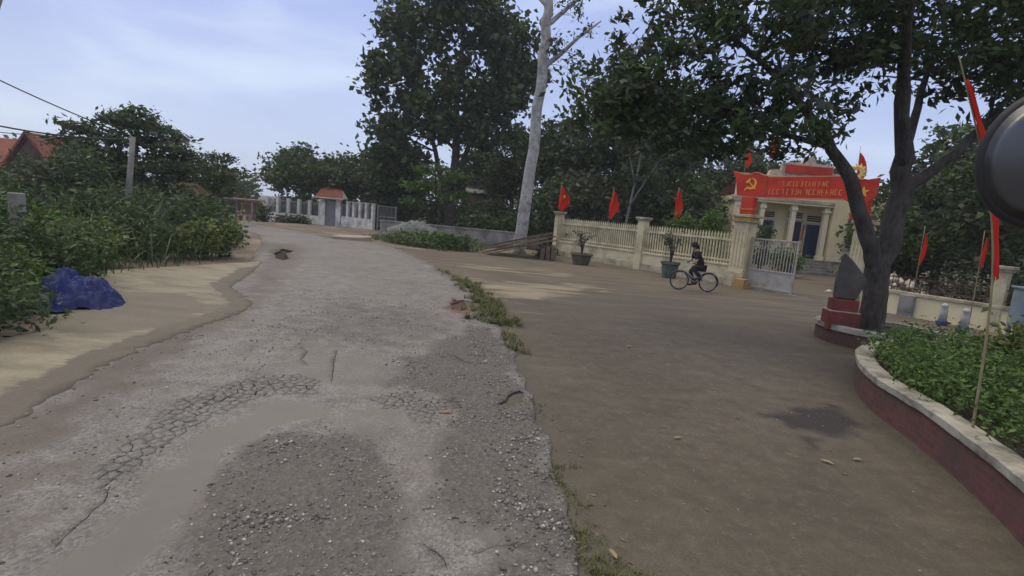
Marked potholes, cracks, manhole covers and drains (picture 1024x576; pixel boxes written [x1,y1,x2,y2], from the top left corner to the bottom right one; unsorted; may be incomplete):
pothole [274,249,292,260]
crack [56,353,320,547]
